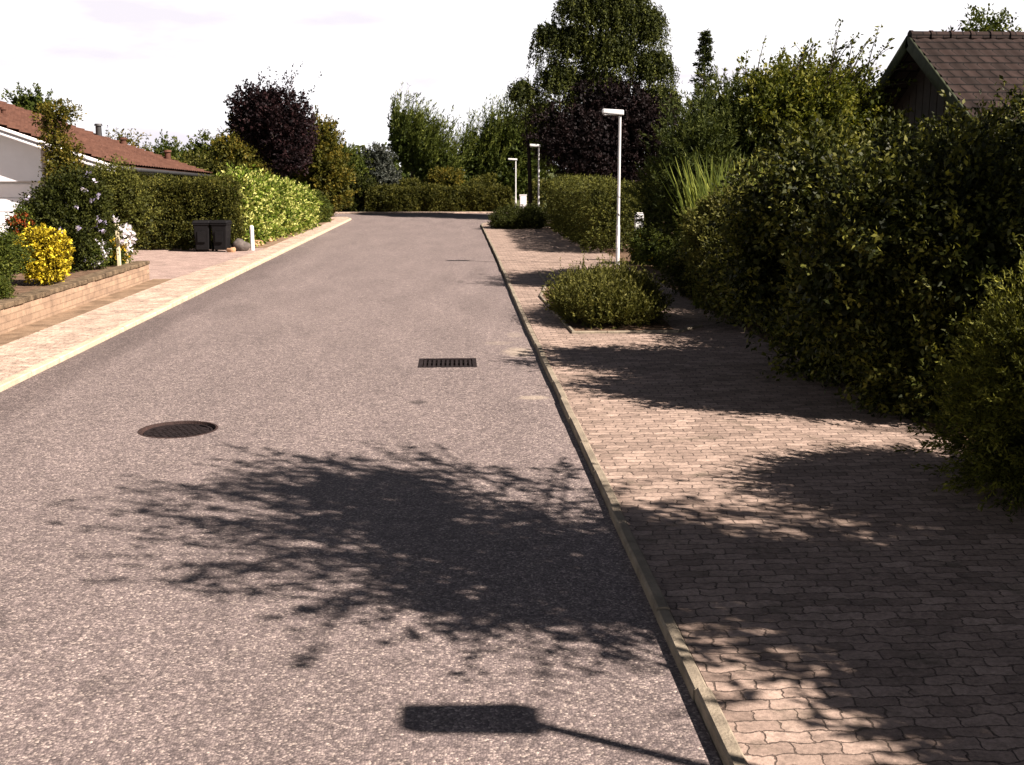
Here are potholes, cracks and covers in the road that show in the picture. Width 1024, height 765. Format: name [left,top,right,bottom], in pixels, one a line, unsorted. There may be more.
manhole cover [138,421,218,438]
